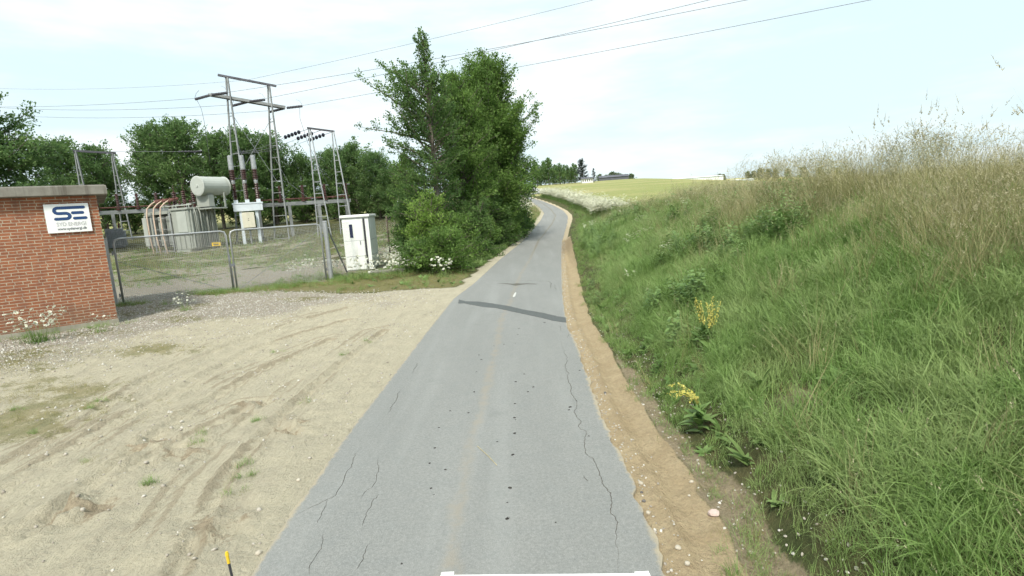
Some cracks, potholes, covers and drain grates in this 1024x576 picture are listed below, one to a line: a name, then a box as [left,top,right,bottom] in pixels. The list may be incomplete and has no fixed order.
crack [562,347,619,568]
crack [296,449,379,575]
